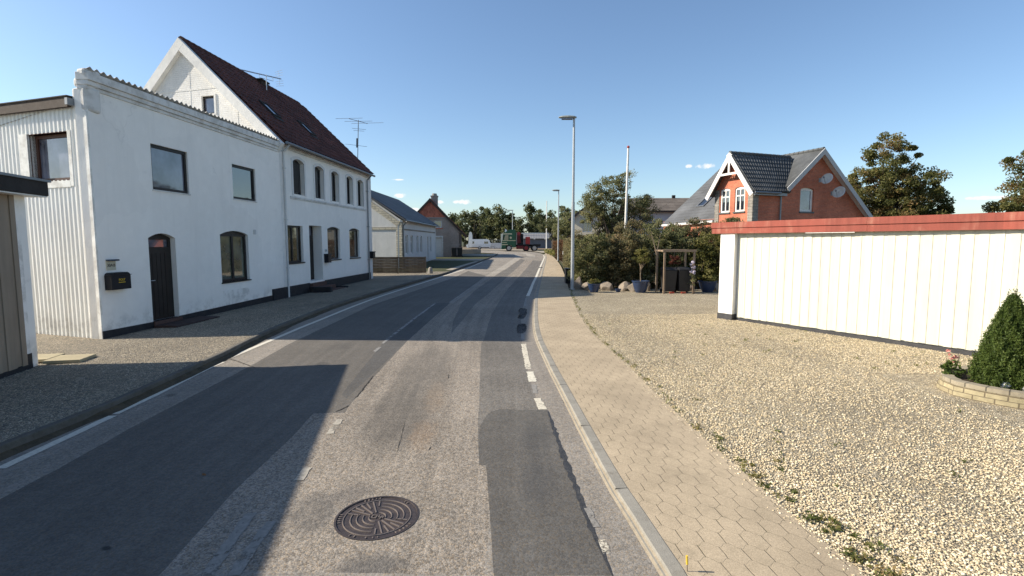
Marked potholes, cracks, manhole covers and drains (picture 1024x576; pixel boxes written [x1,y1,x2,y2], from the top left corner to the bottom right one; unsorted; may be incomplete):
manhole cover [334,496,419,541]
